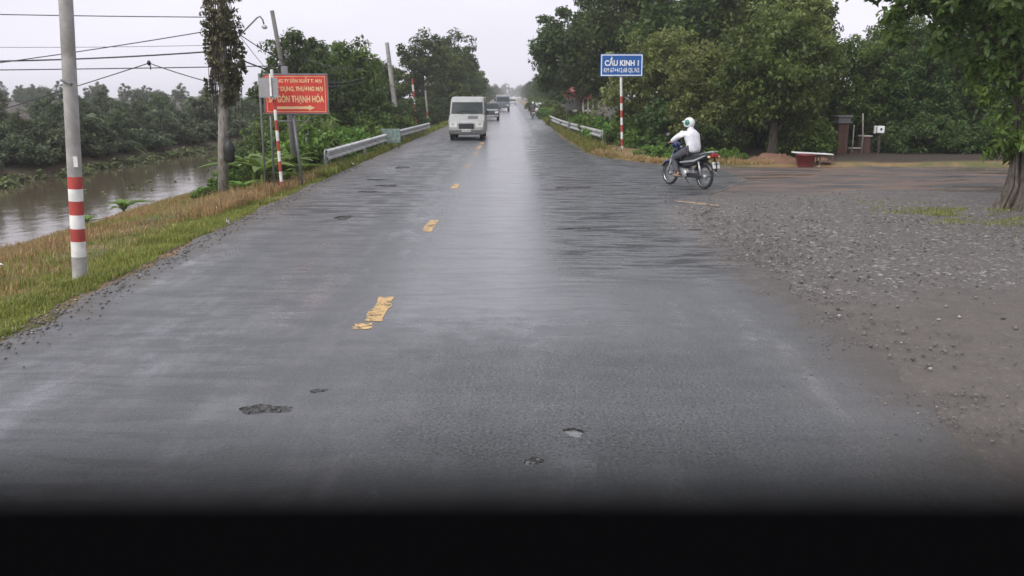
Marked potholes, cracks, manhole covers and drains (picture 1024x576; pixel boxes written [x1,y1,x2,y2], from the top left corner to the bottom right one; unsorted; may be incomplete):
pothole [239,404,293,415]
pothole [563,428,585,437]
